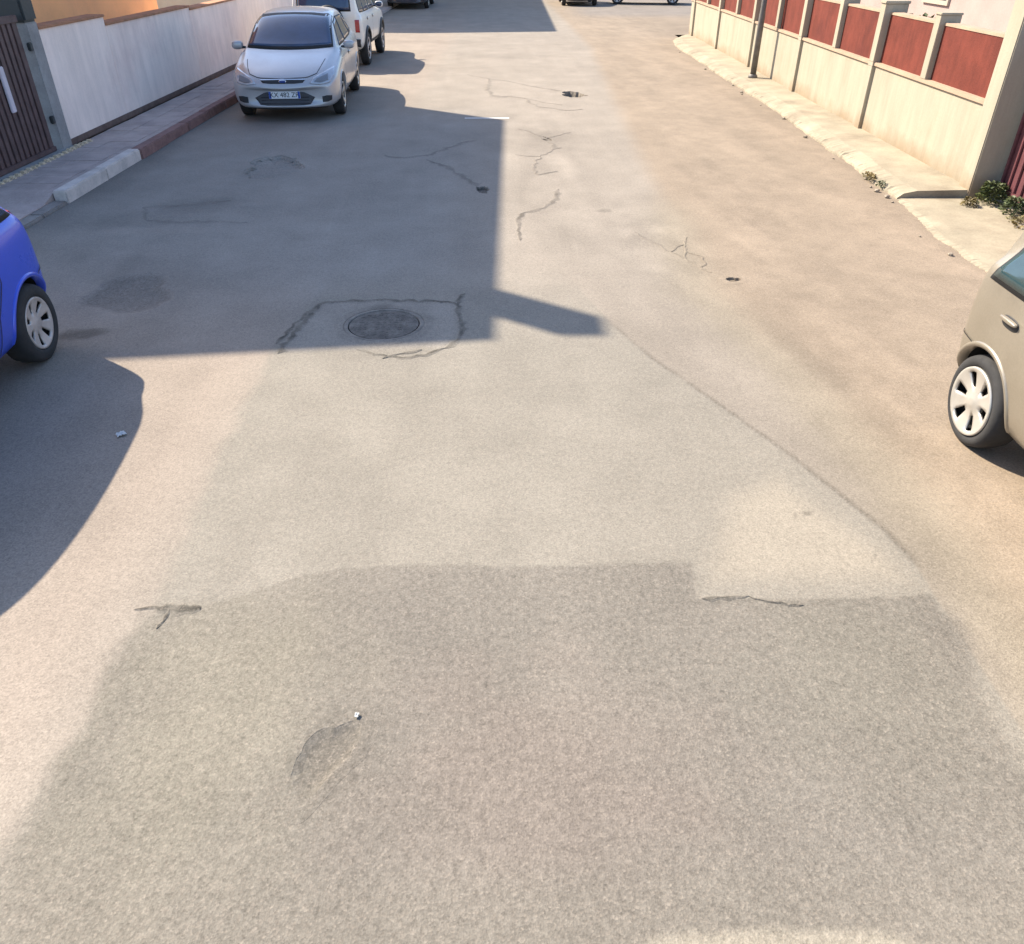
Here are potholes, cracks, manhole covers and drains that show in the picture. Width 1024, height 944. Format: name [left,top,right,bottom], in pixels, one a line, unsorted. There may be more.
pothole [559,90,591,99]
crack [384,140,482,186]
crack [702,595,803,607]
manhole cover [334,305,433,345]
crack [134,602,201,629]
crack [635,232,712,273]
crack [515,129,565,240]
crack [467,74,582,111]
